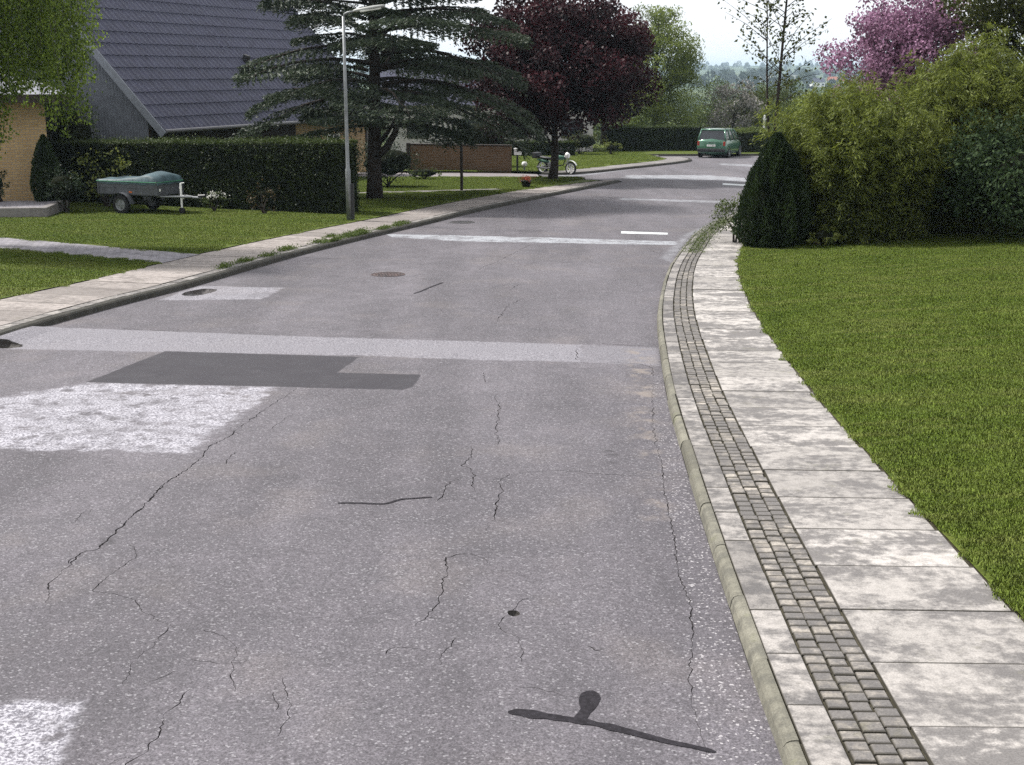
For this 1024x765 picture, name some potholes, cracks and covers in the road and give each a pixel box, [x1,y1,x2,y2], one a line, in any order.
crack [45,388,297,684]
crack [107,671,190,765]
crack [437,449,476,501]
crack [411,554,488,628]
crack [272,679,292,736]
